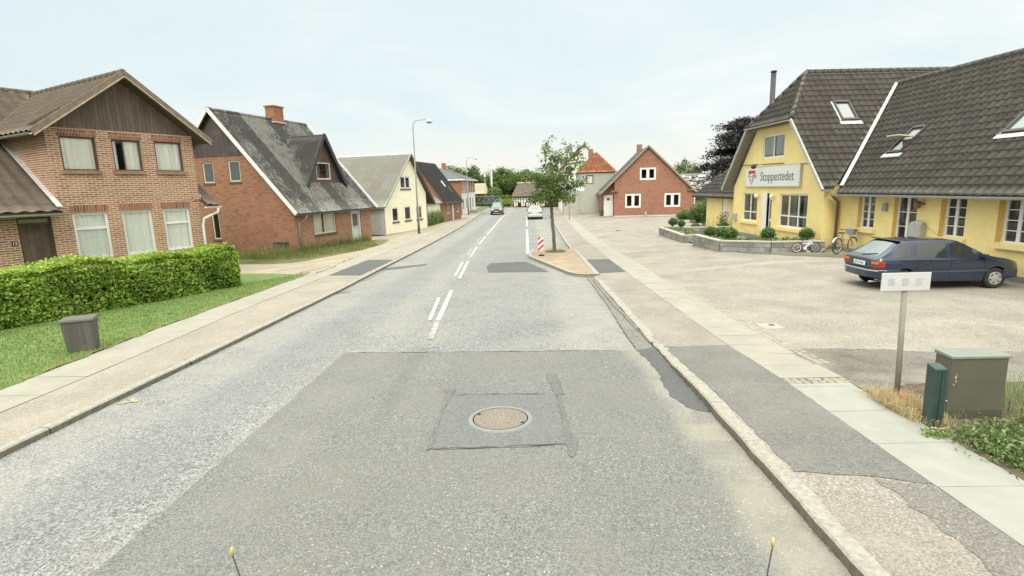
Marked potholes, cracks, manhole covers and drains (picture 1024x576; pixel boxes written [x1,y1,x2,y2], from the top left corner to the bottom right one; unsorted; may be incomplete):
manhole cover [468,406,533,433]
